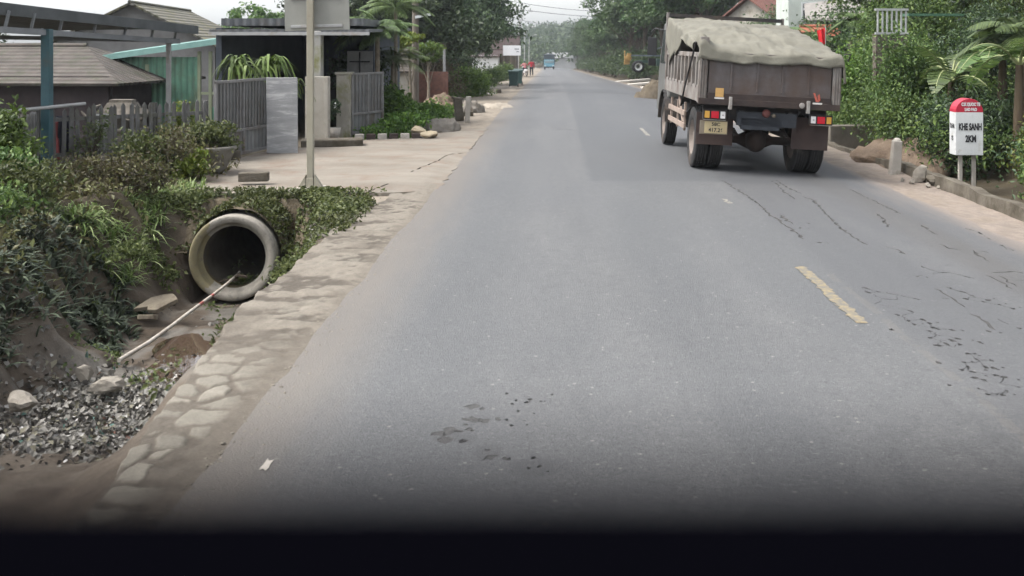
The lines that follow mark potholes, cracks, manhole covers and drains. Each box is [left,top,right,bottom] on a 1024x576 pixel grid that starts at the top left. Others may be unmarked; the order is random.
crack [722,180,1022,396]
